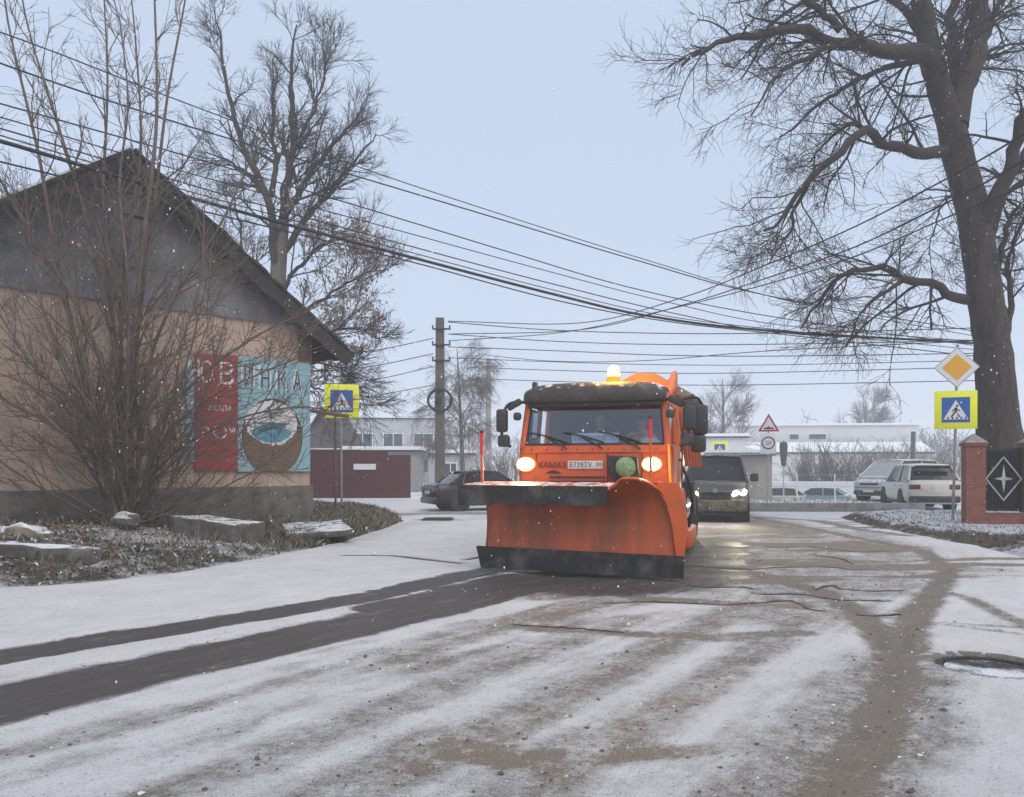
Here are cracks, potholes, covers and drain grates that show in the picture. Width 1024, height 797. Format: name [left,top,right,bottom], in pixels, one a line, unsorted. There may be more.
crack [346,555,479,564]
crack [612,546,901,616]
manhole cover [910,649,1024,683]
crack [513,624,624,633]
